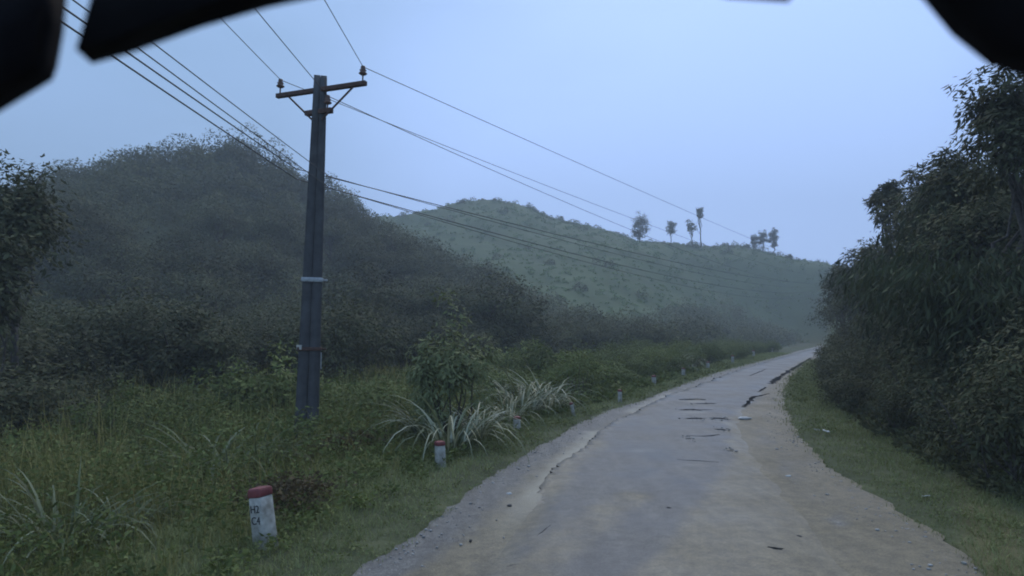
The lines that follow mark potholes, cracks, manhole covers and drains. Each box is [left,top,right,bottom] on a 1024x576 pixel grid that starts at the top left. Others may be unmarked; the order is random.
crack [742,358,811,407]
